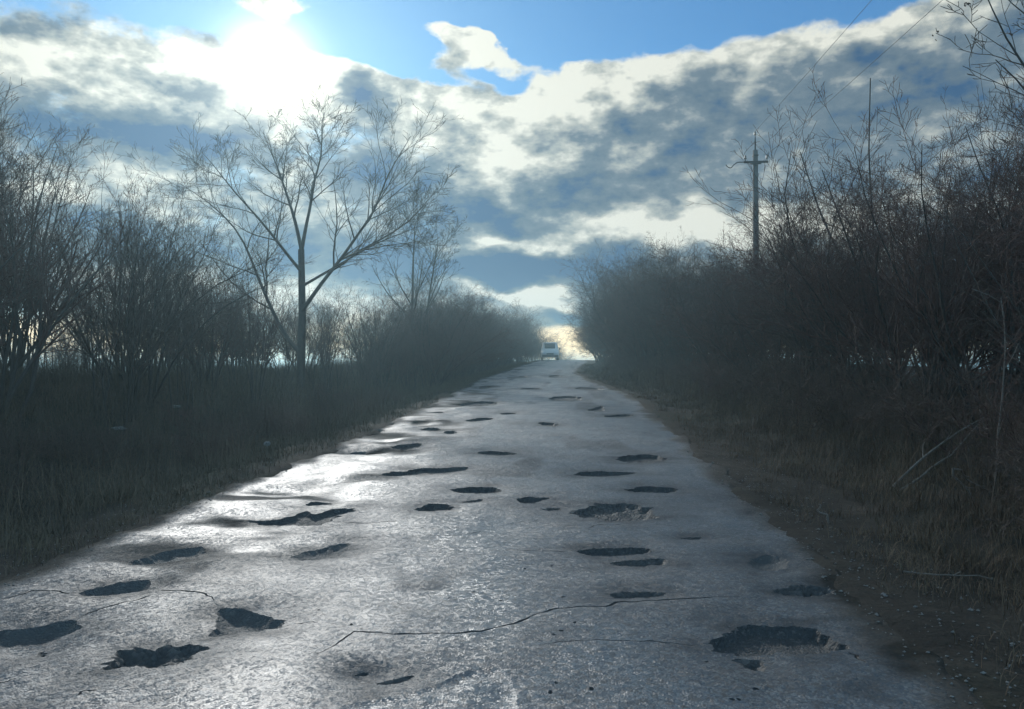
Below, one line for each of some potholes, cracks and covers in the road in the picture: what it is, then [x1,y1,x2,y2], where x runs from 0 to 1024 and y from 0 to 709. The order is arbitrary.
pothole [127,546,206,565]
pothole [382,467,468,476]
